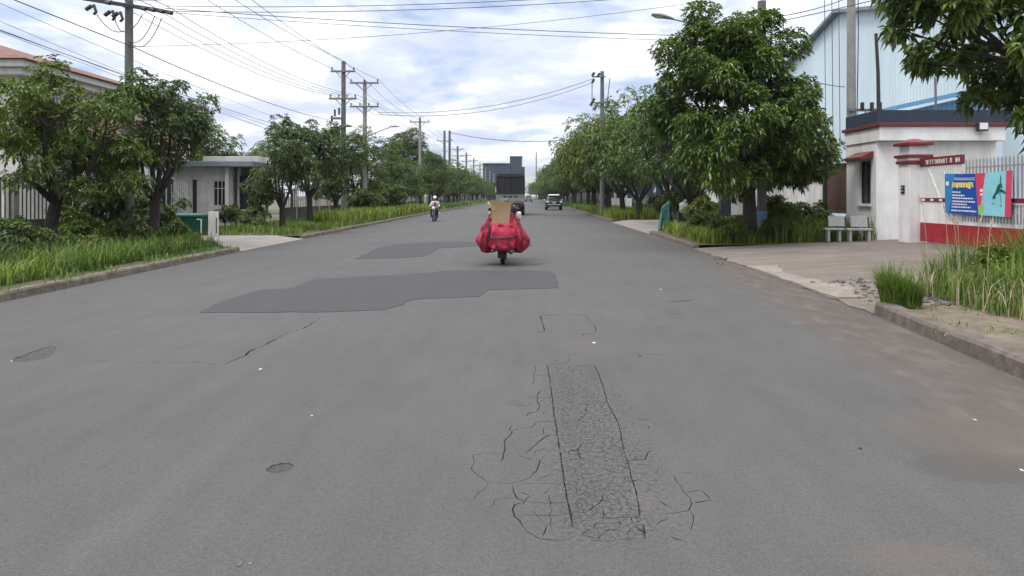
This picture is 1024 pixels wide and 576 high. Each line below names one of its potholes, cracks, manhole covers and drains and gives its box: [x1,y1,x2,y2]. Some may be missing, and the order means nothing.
crack [464,359,712,550]
pothole [266,463,294,474]
crack [105,317,320,364]
pothole [13,346,57,362]
